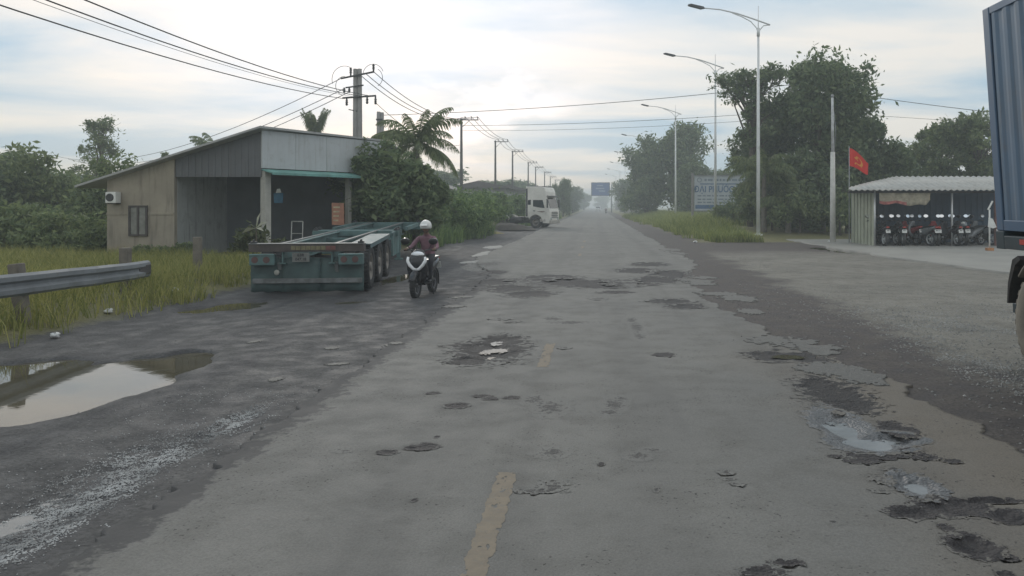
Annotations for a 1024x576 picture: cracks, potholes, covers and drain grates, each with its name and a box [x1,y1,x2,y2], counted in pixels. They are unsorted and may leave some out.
pothole [877,494,1024,525]
pothole [434,332,545,369]
pothole [795,402,935,457]
pothole [638,298,708,310]
pothole [402,442,444,451]
pothole [882,468,954,504]
pothole [936,530,1013,563]
